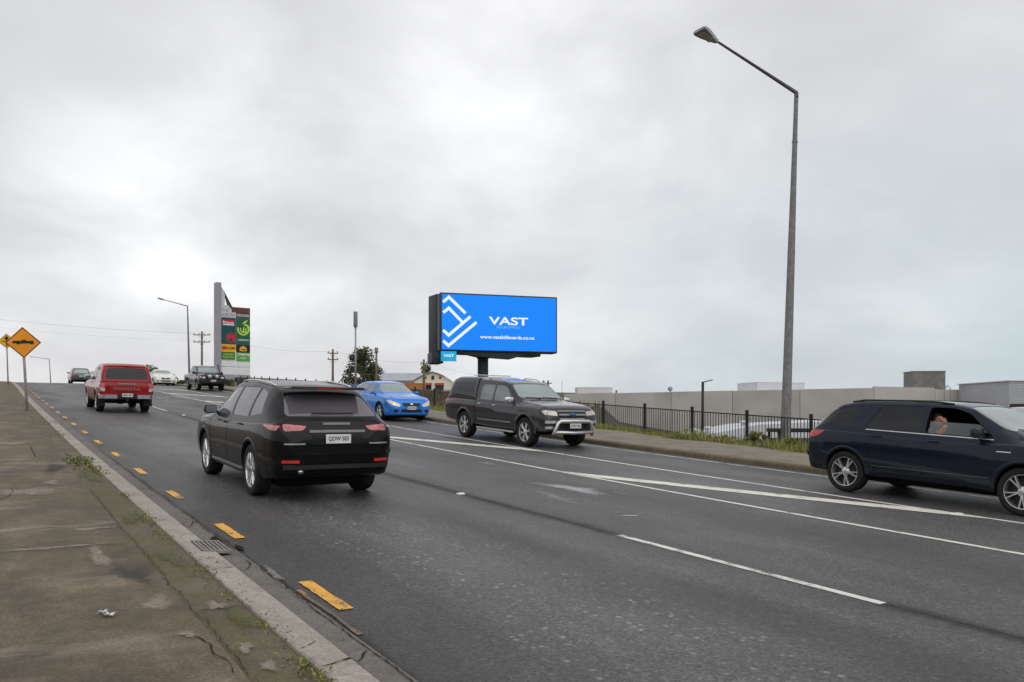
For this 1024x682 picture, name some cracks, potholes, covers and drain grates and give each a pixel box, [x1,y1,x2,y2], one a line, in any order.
crack [260,567,414,682]
drain grate [191,540,232,553]
